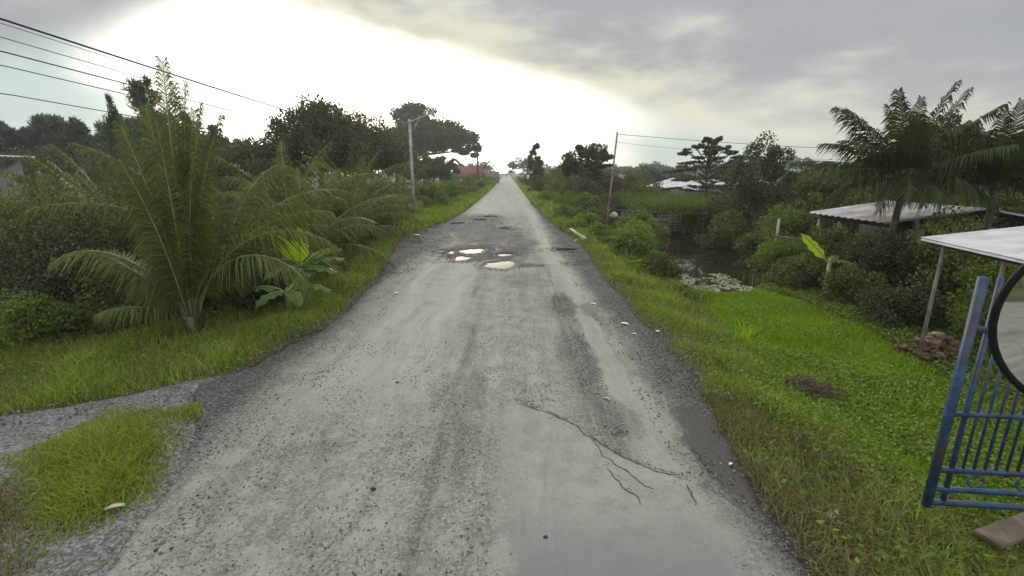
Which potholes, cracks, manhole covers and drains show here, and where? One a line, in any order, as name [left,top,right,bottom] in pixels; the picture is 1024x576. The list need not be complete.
pothole [478,259,521,271]
crack [515,399,722,505]
